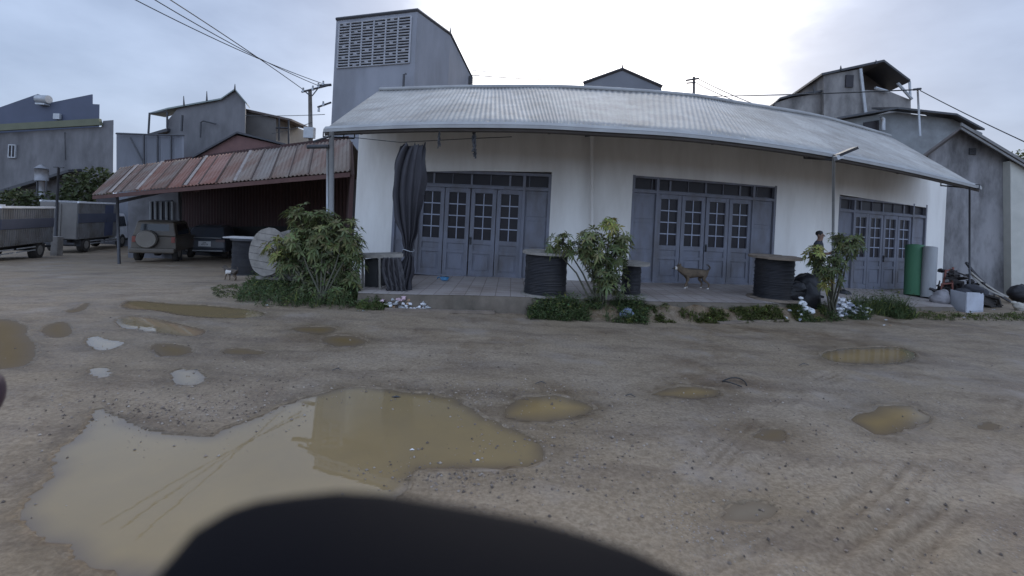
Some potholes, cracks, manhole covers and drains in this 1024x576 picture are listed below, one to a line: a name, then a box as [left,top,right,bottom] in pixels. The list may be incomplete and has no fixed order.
pothole [113,316,209,337]
pothole [118,300,267,319]
pothole [846,403,938,437]
pothole [80,334,128,351]
pothole [165,367,211,387]
pothole [11,385,550,576]
pothole [972,420,1005,432]
pothole [290,325,339,334]
pothole [83,364,117,379]
pothole [816,345,920,365]
pothole [218,347,269,356]
pothole [649,384,725,401]
